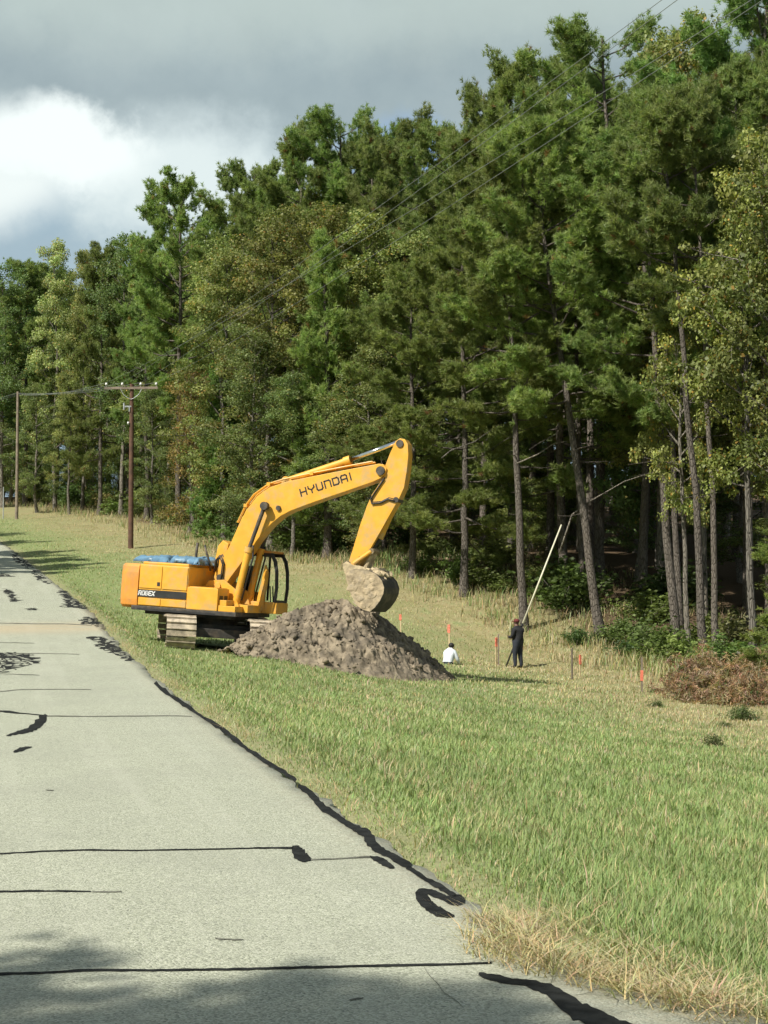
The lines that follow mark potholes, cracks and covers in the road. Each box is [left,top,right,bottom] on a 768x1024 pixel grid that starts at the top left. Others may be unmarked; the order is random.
crack [0,642,91,692]
crack [7,552,134,661]
